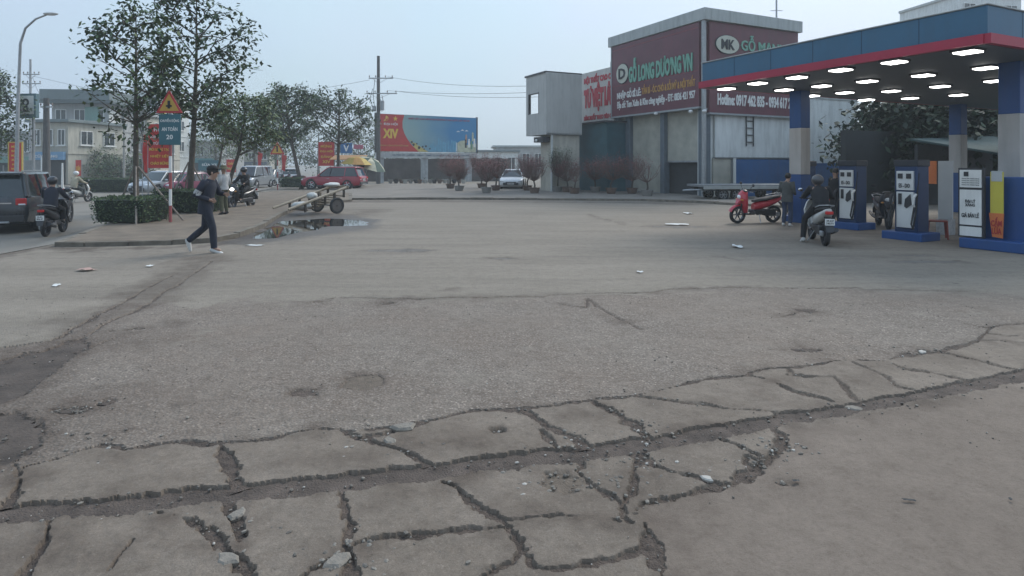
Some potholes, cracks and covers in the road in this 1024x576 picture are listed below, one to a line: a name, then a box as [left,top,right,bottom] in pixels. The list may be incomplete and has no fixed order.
crack [0,324,1024,576]
pothole [342,375,383,391]
crack [0,262,211,365]
crack [365,288,952,330]
